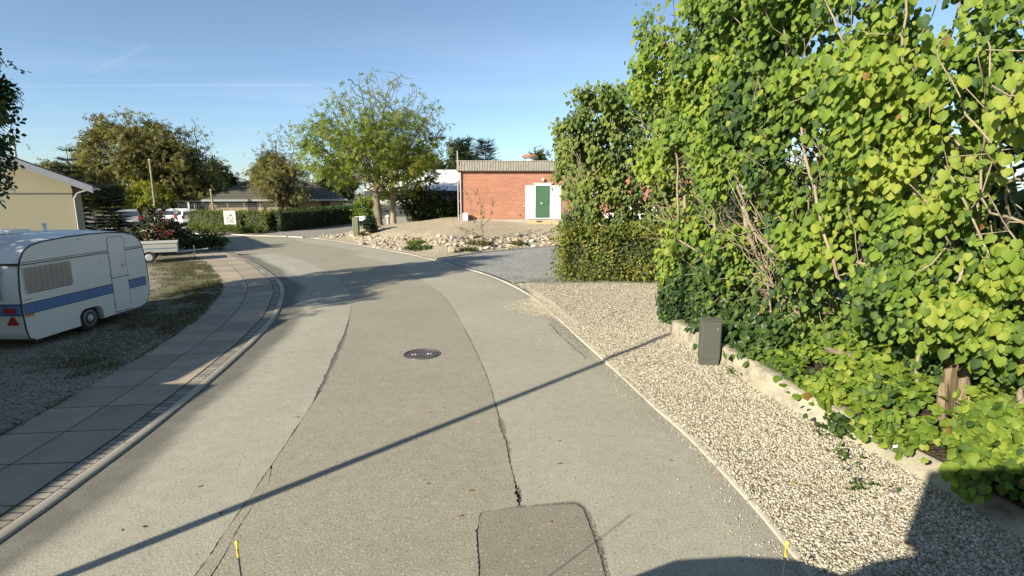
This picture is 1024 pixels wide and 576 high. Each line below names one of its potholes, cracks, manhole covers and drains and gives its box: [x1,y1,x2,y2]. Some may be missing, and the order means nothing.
manhole cover [403,348,441,360]
crack [410,273,611,576]
